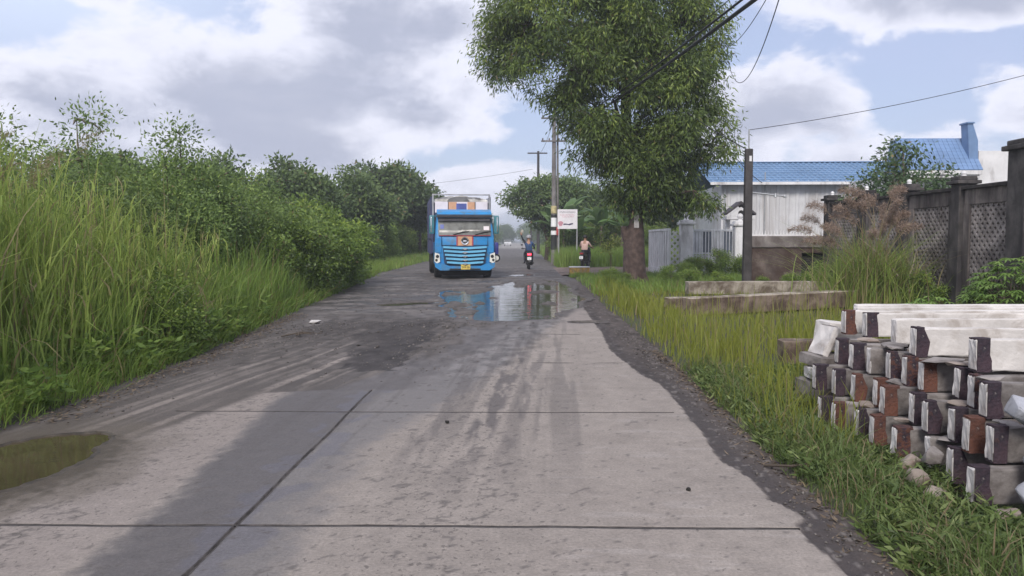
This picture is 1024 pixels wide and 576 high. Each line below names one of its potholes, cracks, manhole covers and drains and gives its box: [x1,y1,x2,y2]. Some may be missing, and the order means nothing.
pothole [0,431,116,493]
pothole [432,280,594,322]
